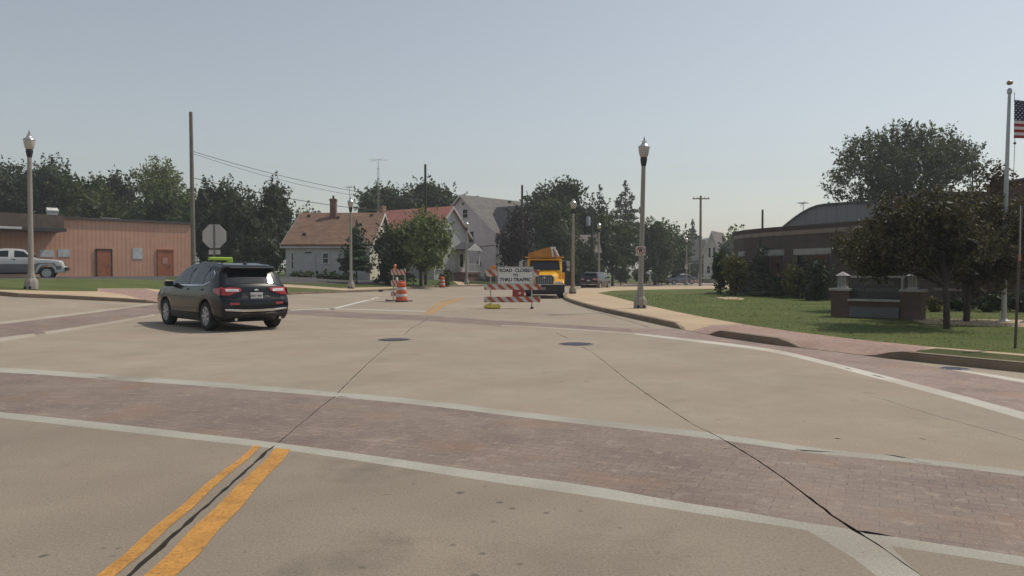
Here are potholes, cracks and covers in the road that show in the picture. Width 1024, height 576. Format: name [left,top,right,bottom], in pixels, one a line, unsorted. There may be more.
crack [581,346,930,576]
crack [127,344,389,576]
